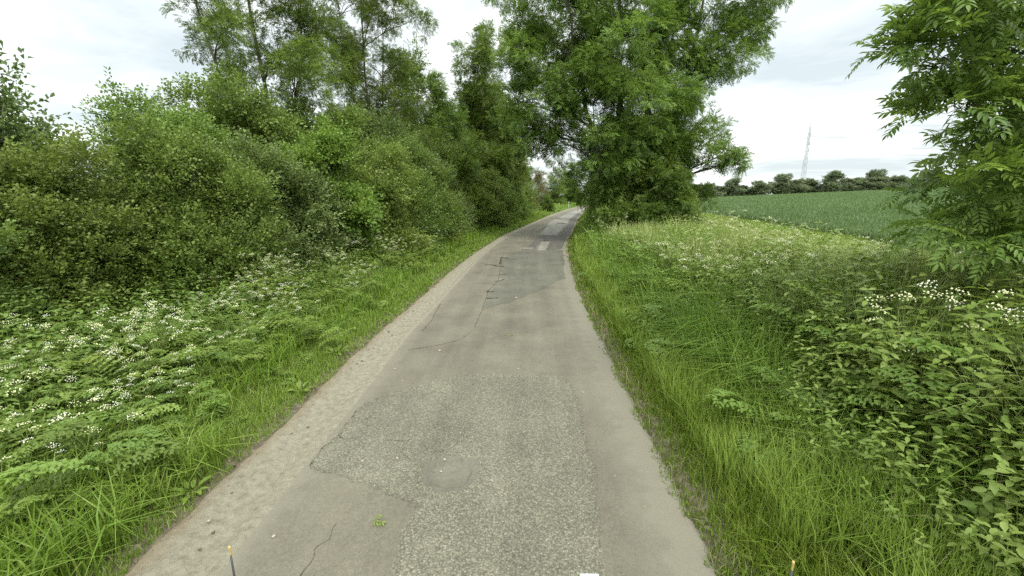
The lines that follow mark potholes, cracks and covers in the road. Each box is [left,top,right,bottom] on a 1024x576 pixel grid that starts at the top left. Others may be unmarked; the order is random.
crack [412,257,508,350]
